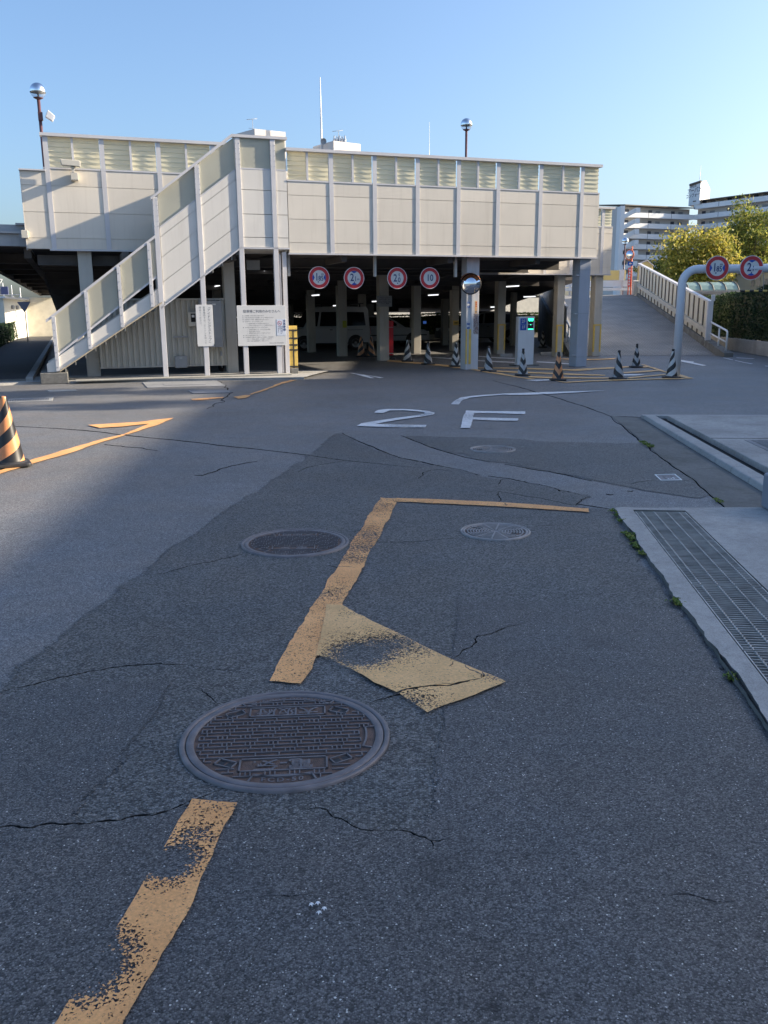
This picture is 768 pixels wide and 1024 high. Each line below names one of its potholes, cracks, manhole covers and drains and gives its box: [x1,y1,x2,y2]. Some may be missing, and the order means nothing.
crack [1,792,214,828]
manhole cover [179,690,390,794]
crack [310,804,442,849]
drain grate [657,540,761,587]
manhole cover [470,445,516,453]
manhole cover [241,529,349,558]
drain grate [635,511,714,541]
manhole cover [460,522,531,541]
